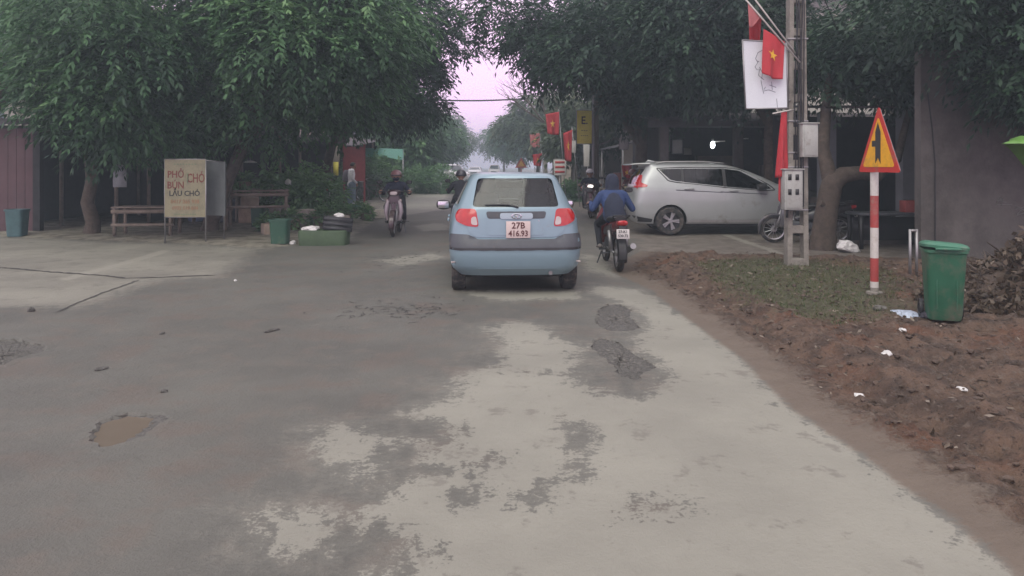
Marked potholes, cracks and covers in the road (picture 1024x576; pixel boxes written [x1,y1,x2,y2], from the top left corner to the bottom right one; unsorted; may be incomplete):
pothole [587,302,649,334]
pothole [72,409,183,452]
pothole [0,337,58,367]
crack [303,297,477,323]
pothole [581,335,672,383]
